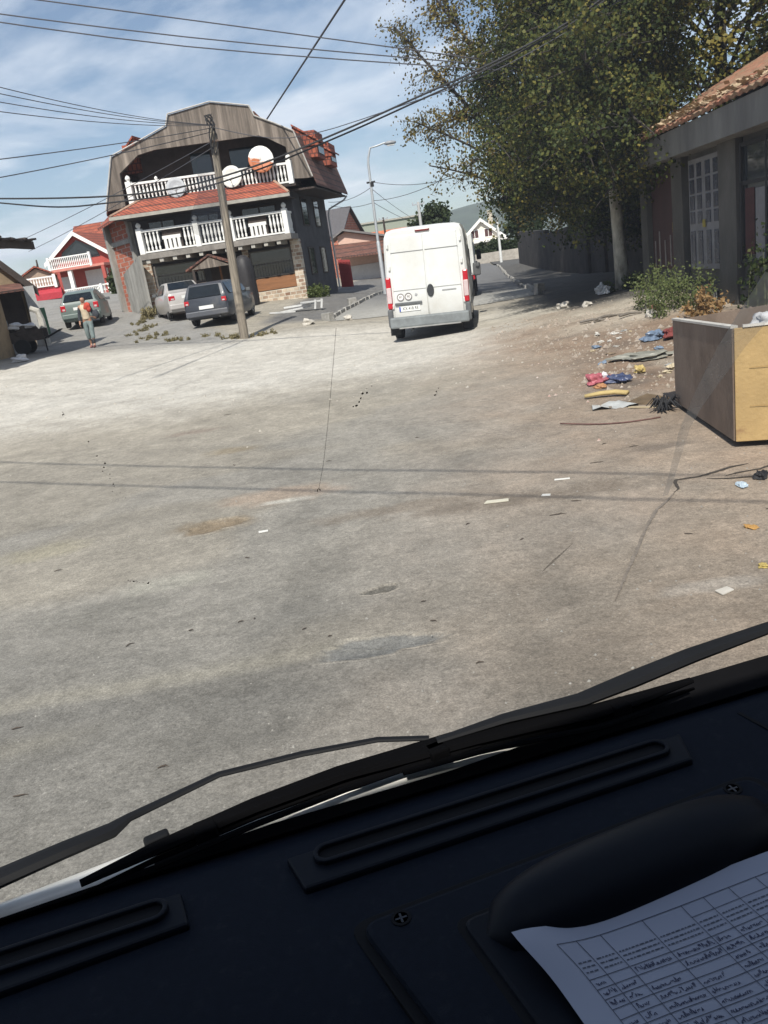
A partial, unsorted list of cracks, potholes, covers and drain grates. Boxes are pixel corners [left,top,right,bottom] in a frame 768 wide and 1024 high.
crack [615,463,768,600]
pothole [356,582,402,596]
